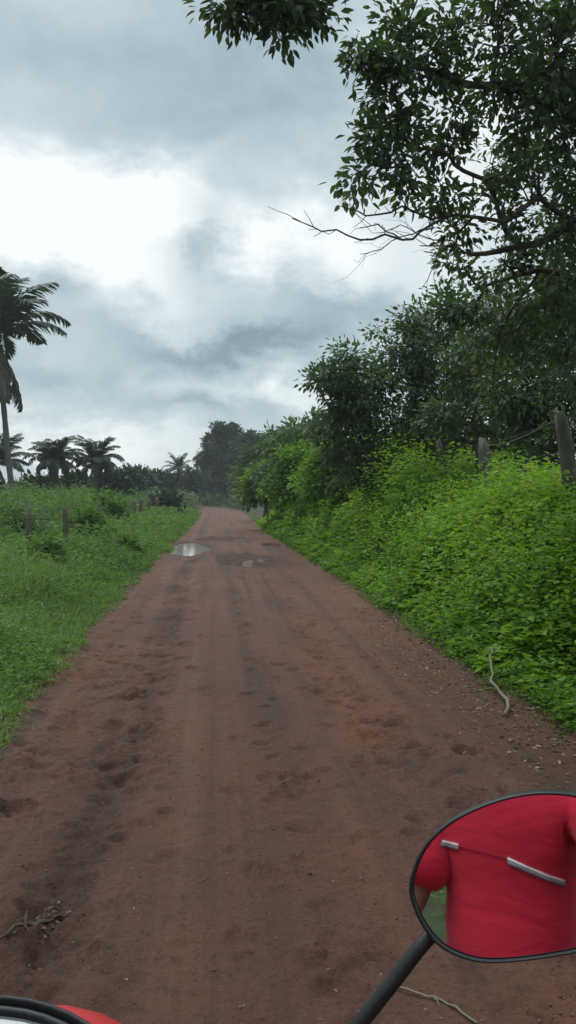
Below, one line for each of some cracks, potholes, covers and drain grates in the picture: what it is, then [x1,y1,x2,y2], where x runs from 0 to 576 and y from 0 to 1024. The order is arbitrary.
pothole [209,552,290,572]
pothole [161,540,218,560]
